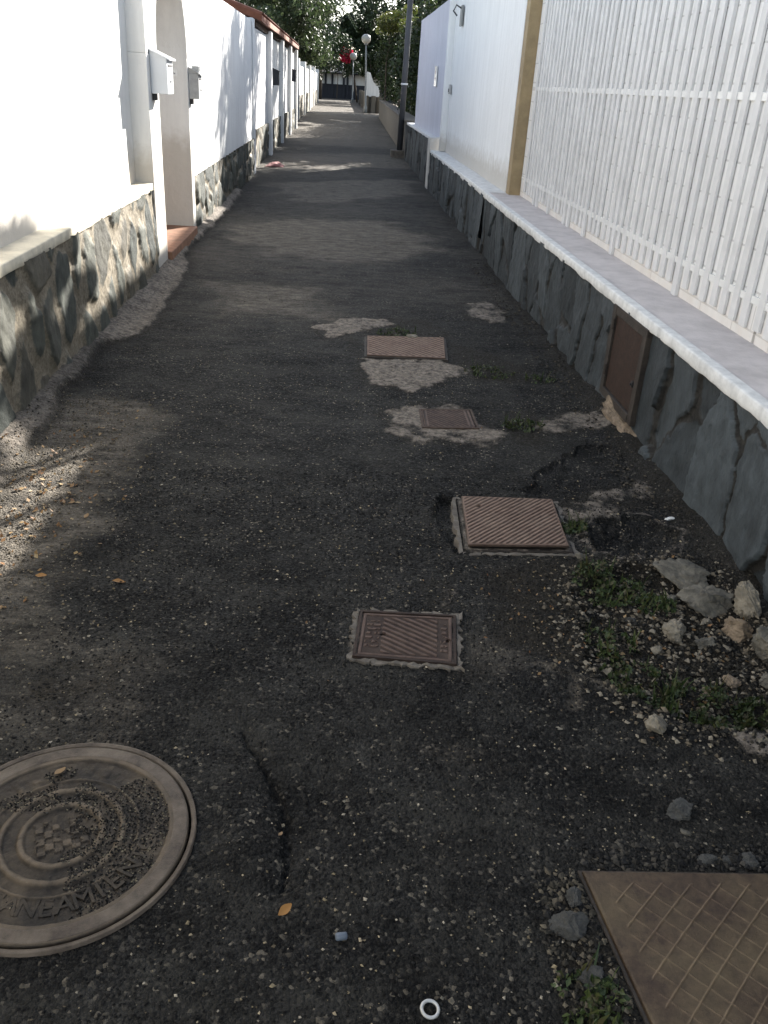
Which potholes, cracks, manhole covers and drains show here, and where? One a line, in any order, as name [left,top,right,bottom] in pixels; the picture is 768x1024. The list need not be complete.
pothole [522,444,633,503]
manhole cover [0,743,197,958]
manhole cover [364,336,448,362]
manhole cover [450,496,580,557]
crack [242,734,296,894]
manhole cover [346,607,465,673]
manhole cover [577,870,768,1024]
pothole [579,514,682,557]
manhole cover [419,409,480,430]
